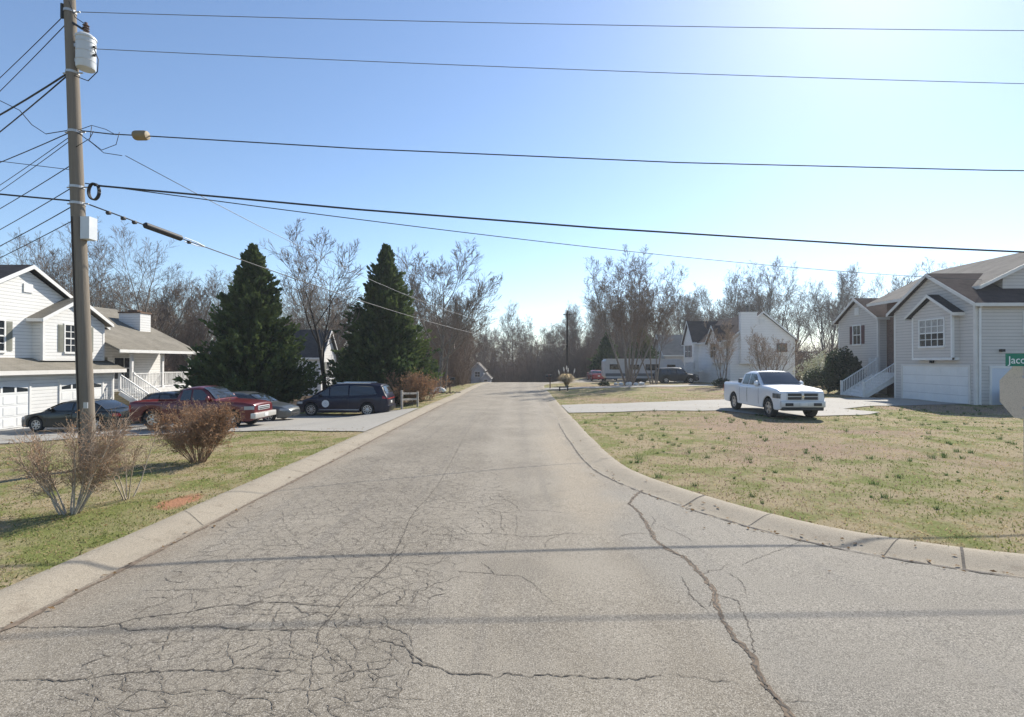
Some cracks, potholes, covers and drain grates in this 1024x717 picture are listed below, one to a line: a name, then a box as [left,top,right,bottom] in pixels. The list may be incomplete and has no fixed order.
crack [0,402,1024,717]
